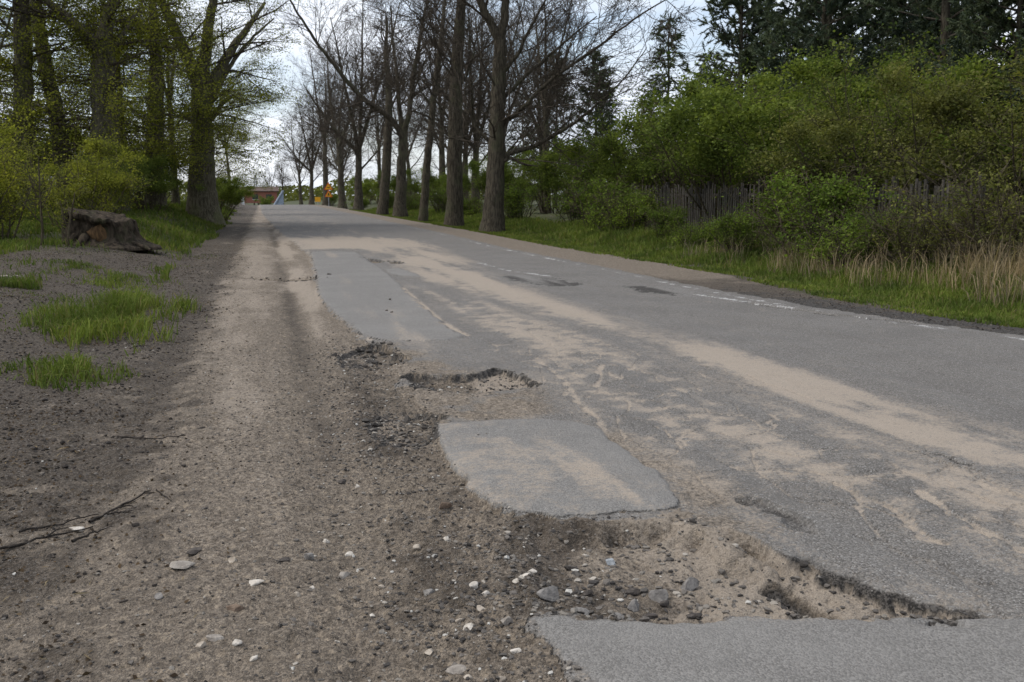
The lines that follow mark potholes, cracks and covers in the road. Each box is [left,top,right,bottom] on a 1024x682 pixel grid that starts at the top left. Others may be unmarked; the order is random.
pothole [490,506,979,626]
pothole [338,342,414,370]
pothole [401,368,542,393]
